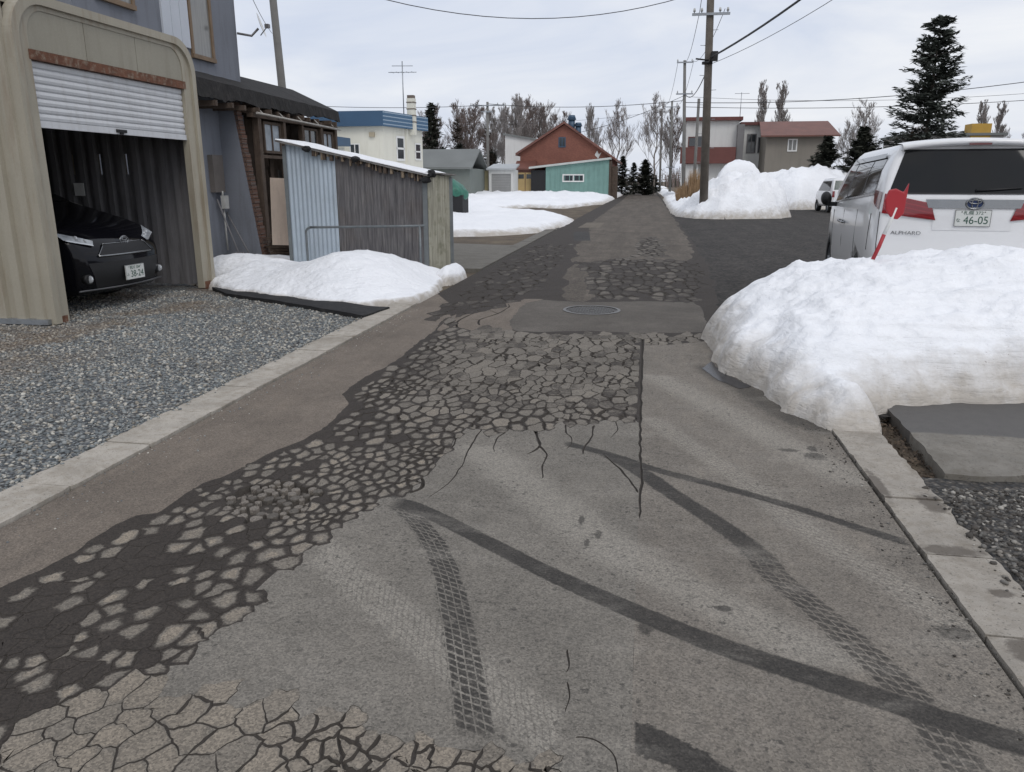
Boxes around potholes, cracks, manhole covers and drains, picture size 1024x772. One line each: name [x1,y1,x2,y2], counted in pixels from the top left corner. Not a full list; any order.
crack [0,320,698,772]
crack [578,237,708,302]
manhole cover [563,305,621,315]
pothole [221,479,325,531]
crack [434,244,568,327]
